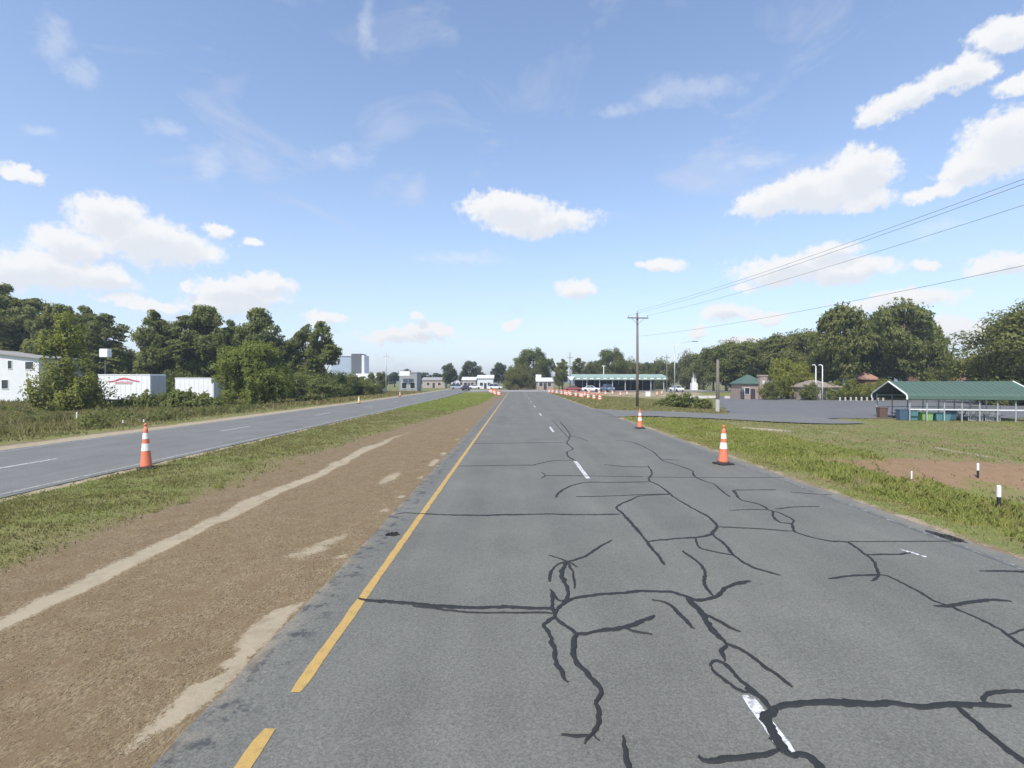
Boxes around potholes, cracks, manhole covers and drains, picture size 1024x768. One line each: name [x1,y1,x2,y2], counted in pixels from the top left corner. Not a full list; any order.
crack [482,460,643,478]
crack [676,477,832,511]
